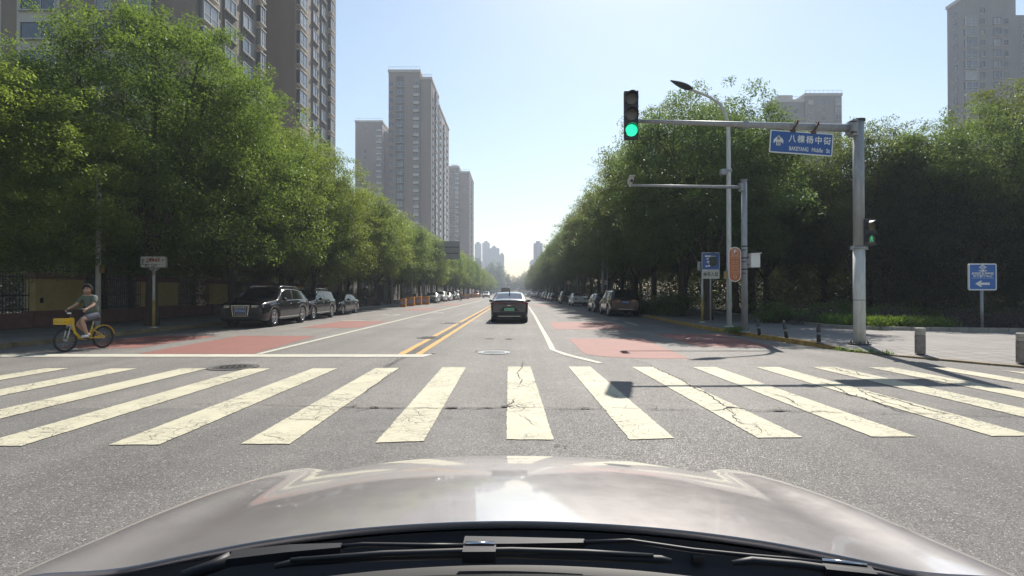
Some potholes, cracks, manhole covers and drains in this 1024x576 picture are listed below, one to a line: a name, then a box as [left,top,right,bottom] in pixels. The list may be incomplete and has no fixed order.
crack [822,367,1010,416]
crack [635,367,827,433]
crack [264,359,485,439]
